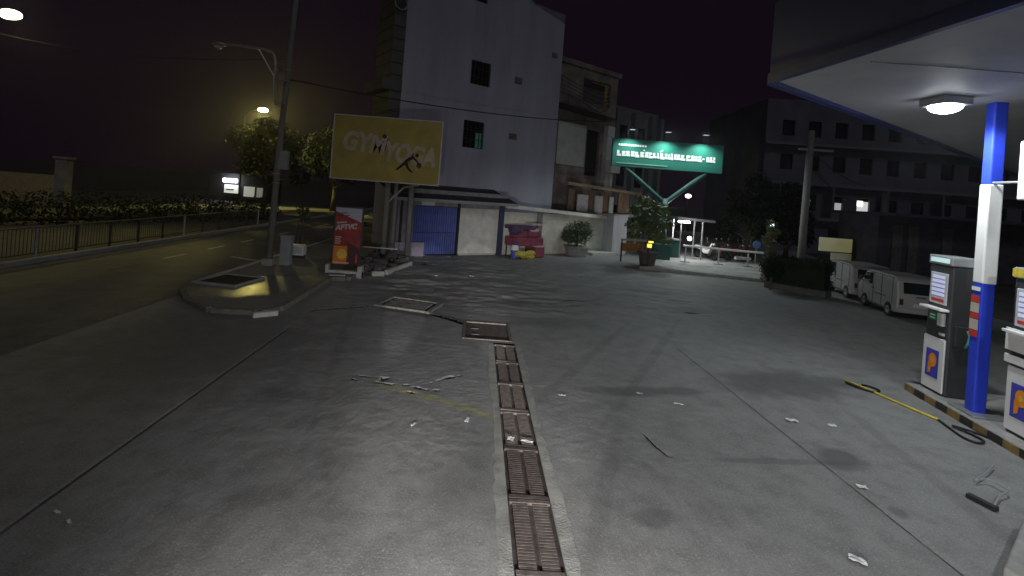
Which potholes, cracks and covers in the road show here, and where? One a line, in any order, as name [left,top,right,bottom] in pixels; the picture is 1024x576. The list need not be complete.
manhole cover [373,296,443,315]
manhole cover [462,320,512,345]
